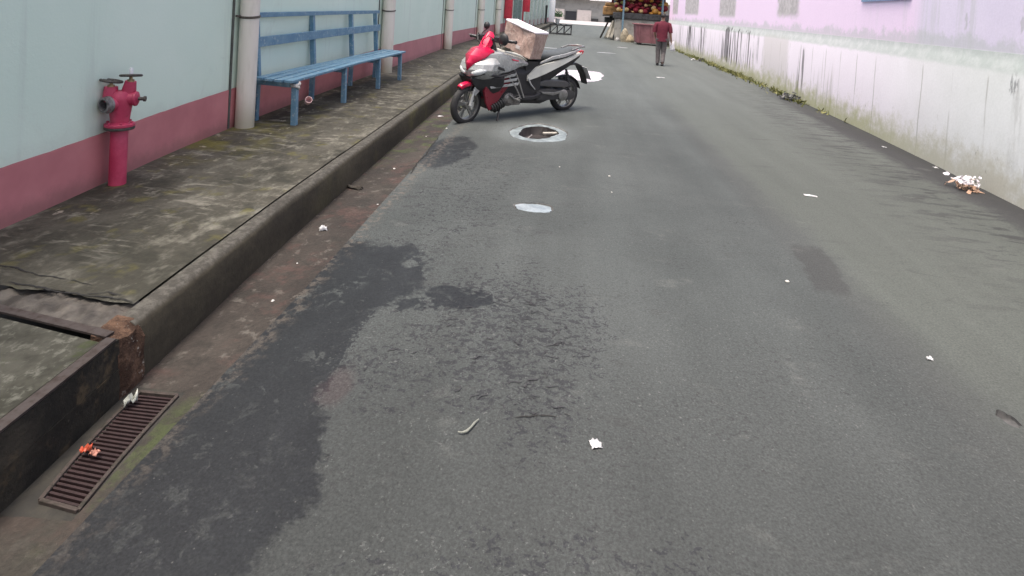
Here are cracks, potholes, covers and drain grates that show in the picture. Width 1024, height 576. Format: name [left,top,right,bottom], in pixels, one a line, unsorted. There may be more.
drain grate [0,387,185,522]
pothole [509,123,568,142]
crack [363,290,608,418]
crack [0,265,132,302]
